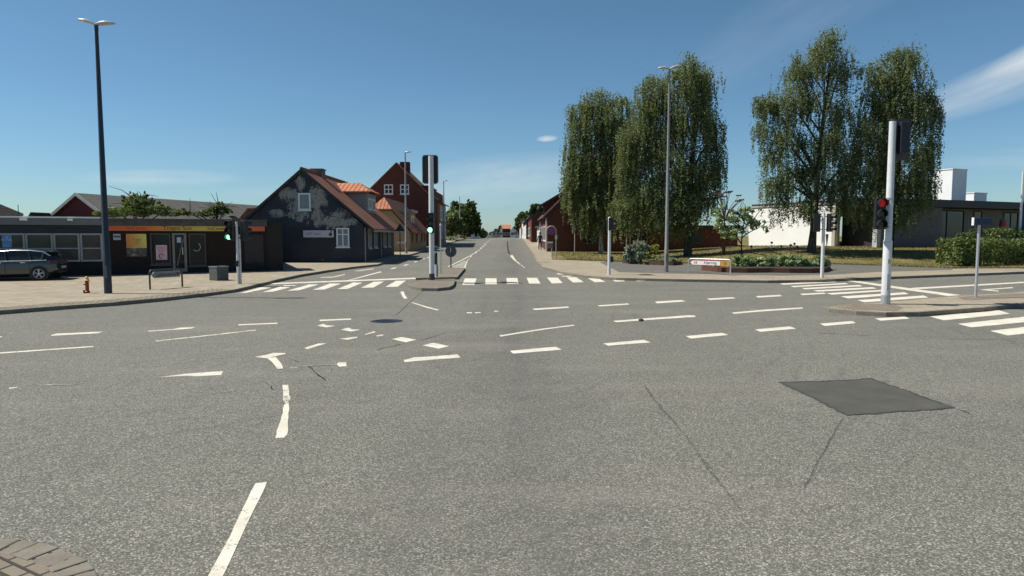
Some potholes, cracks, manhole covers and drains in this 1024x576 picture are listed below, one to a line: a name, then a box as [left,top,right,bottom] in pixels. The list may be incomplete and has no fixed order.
crack [646,387,741,510]
crack [804,419,843,490]
